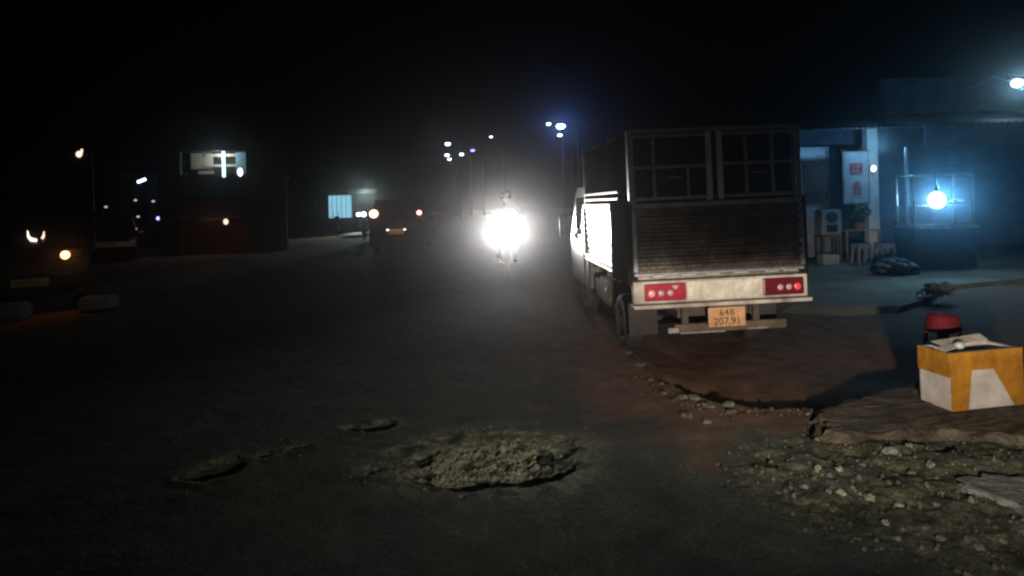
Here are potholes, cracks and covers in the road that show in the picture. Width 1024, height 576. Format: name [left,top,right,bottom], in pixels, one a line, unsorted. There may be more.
pothole [164,451,260,487]
pothole [278,440,323,454]
pothole [346,461,394,479]
pothole [333,416,405,436]
pothole [376,427,590,497]
